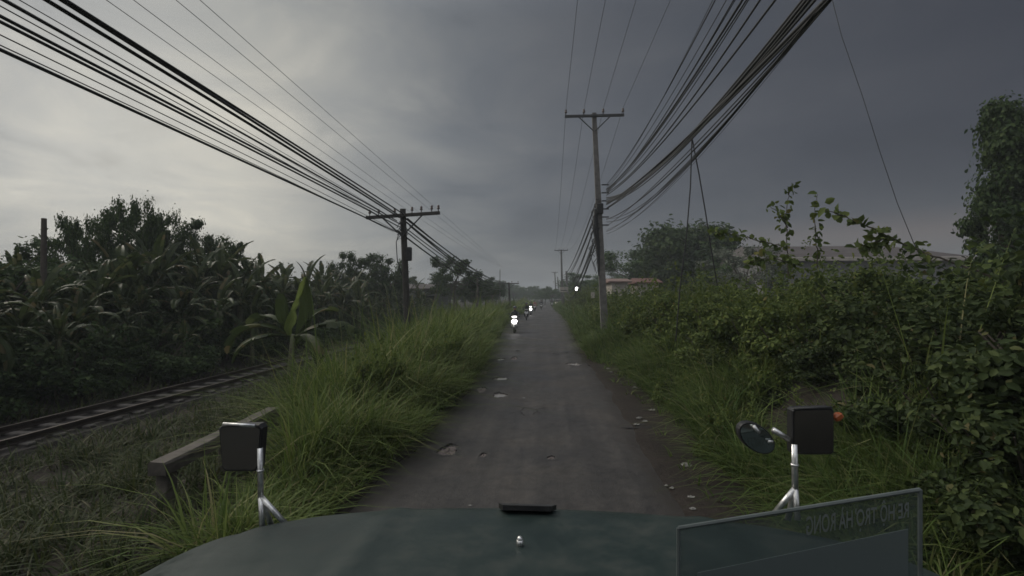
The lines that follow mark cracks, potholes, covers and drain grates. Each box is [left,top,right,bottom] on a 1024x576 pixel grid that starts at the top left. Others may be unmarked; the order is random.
pothole [431,442,461,456]
